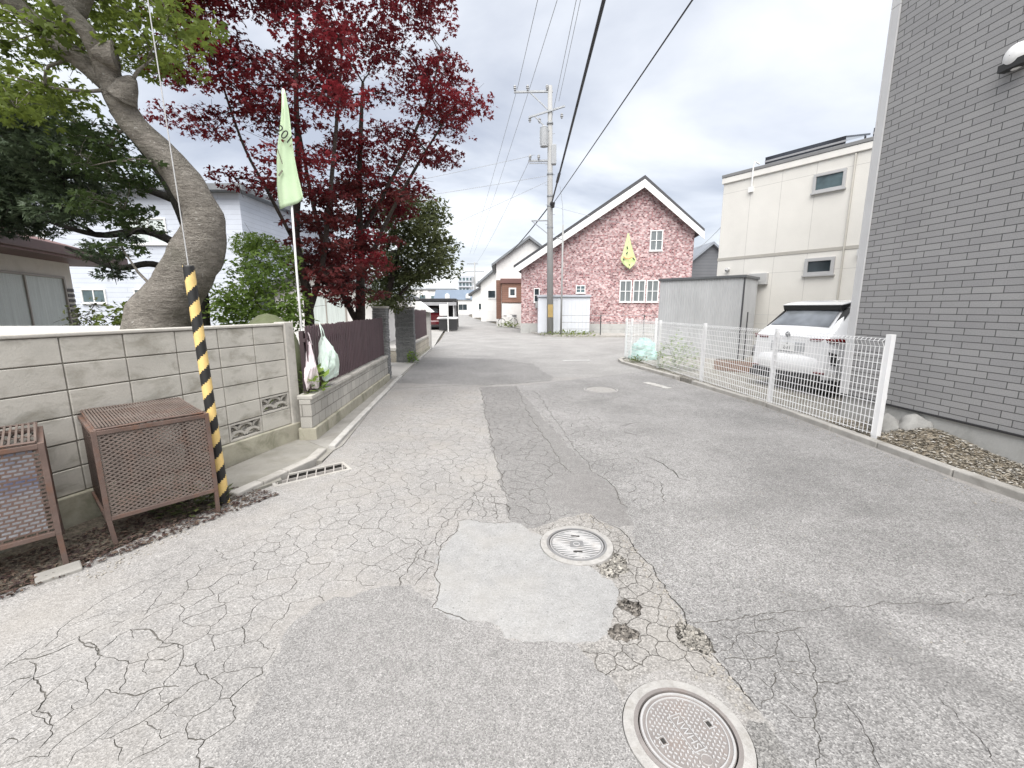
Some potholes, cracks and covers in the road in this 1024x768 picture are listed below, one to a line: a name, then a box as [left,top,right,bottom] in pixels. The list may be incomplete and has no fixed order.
pothole [607,623,640,642]
pothole [595,551,630,579]
crack [1,391,511,768]
crack [399,386,689,621]
pothole [674,621,716,655]
crack [539,515,715,676]
drain grate [272,462,352,487]
crack [690,594,1015,767]
manhole cover [622,680,757,768]
manhole cover [540,526,614,566]
pothole [617,598,643,617]
